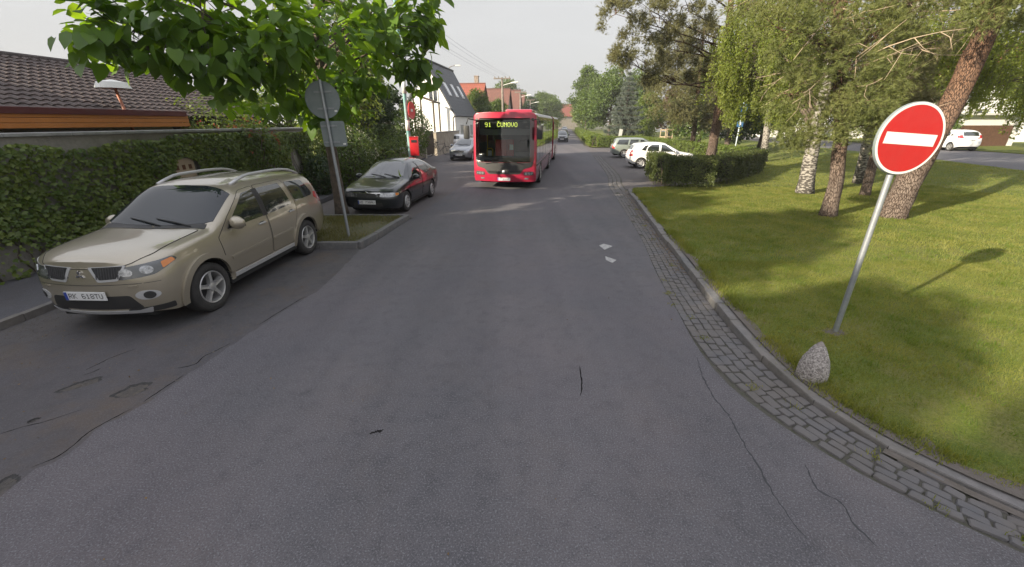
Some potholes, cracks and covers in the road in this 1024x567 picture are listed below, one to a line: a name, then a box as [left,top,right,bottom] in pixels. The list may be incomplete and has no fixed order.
crack [697,359,804,535]
crack [805,465,877,547]
pothole [109,382,153,398]
crack [1,298,302,467]
pothole [53,376,103,393]
pothole [0,474,21,494]
